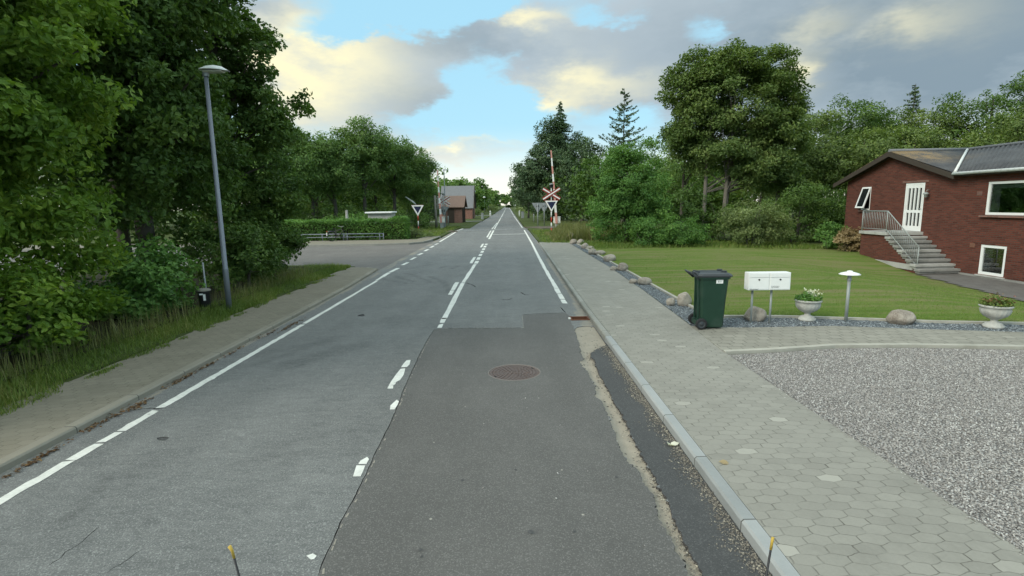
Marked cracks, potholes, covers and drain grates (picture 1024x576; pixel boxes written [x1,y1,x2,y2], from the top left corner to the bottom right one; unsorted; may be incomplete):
manhole cover [488,364,541,381]
